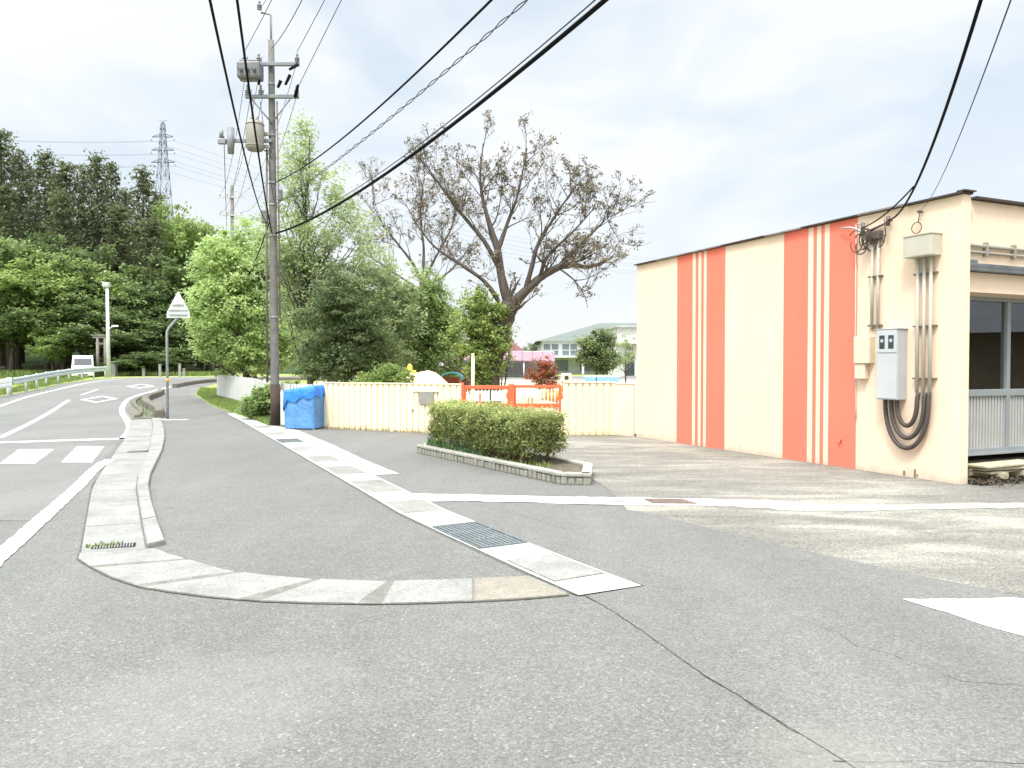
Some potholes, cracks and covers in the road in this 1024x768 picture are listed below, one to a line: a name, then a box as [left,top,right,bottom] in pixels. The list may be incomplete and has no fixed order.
crack [773,611,1024,686]
crack [583,595,806,737]
drain grate [432,521,527,549]
